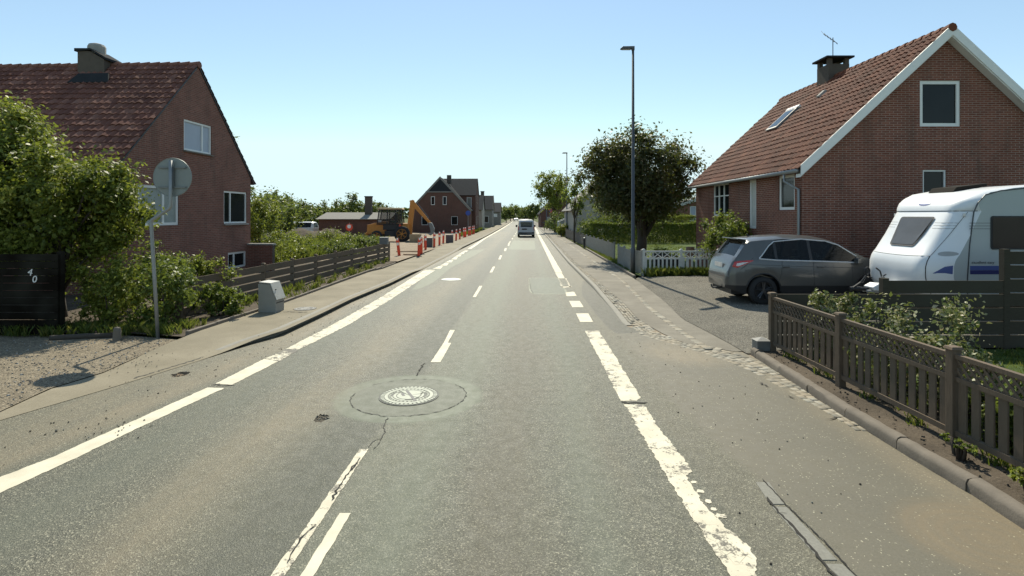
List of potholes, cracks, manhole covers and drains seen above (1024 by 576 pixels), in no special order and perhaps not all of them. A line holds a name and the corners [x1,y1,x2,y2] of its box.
crack [287,525,315,562]
manhole cover [379,386,439,406]
crack [331,363,467,500]
